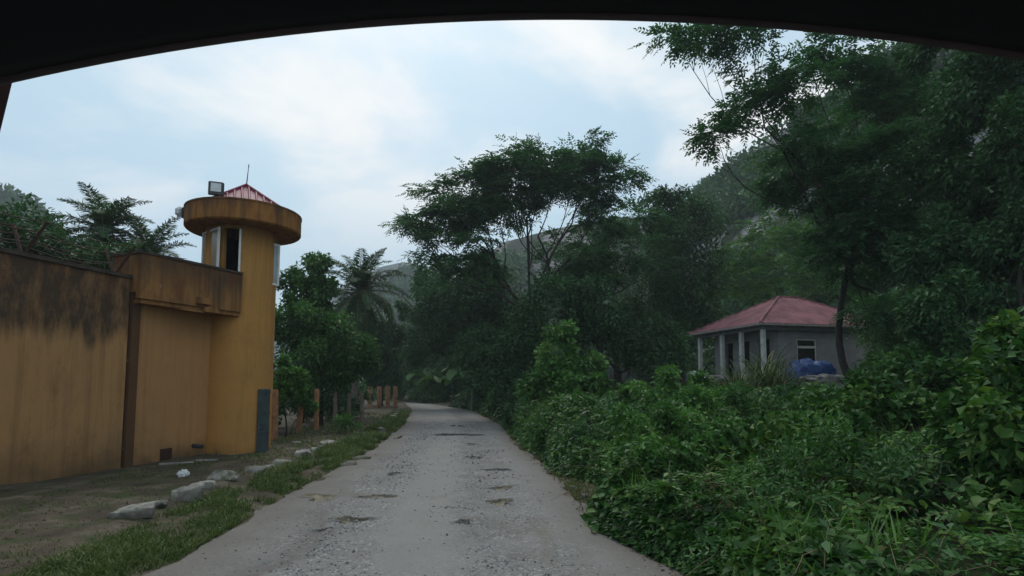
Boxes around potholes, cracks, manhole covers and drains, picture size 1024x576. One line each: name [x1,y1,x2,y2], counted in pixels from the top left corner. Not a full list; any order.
pothole [448,517,476,527]
pothole [296,493,341,503]
pothole [481,497,518,508]
pothole [327,515,383,525]
